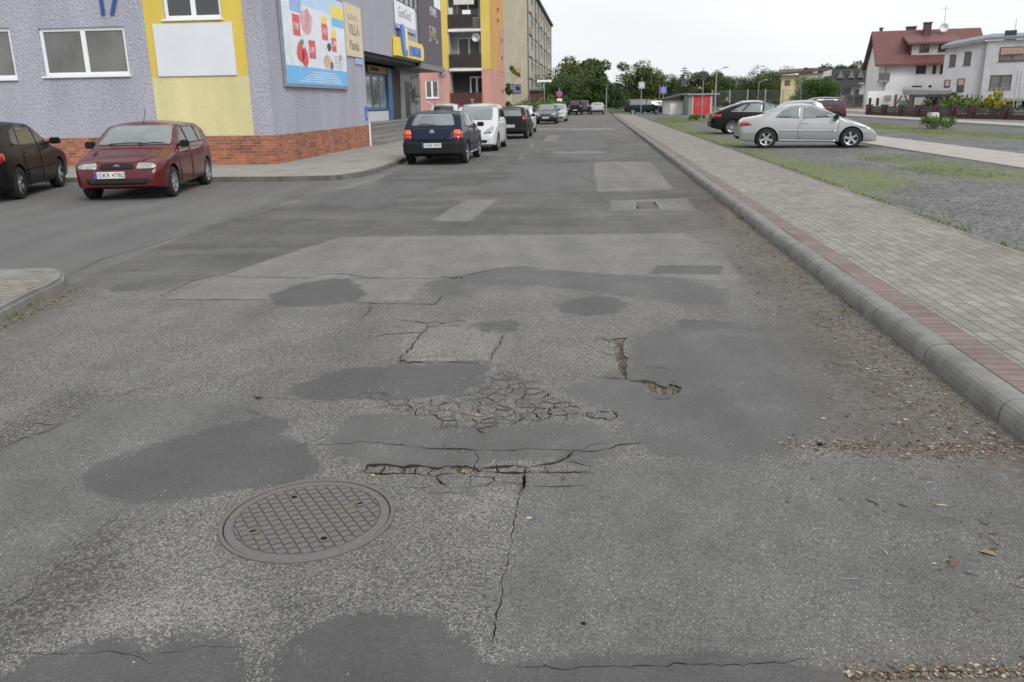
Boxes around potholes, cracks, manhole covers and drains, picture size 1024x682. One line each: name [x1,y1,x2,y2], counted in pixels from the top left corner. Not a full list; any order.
crack [205,369,282,414]
drain grate [633,201,662,210]
pothole [602,330,631,380]
crack [0,386,163,448]
crack [5,645,237,663]
crack [297,320,639,457]
pothole [605,367,682,400]
crack [507,658,813,670]
manhole cover [218,479,395,564]
